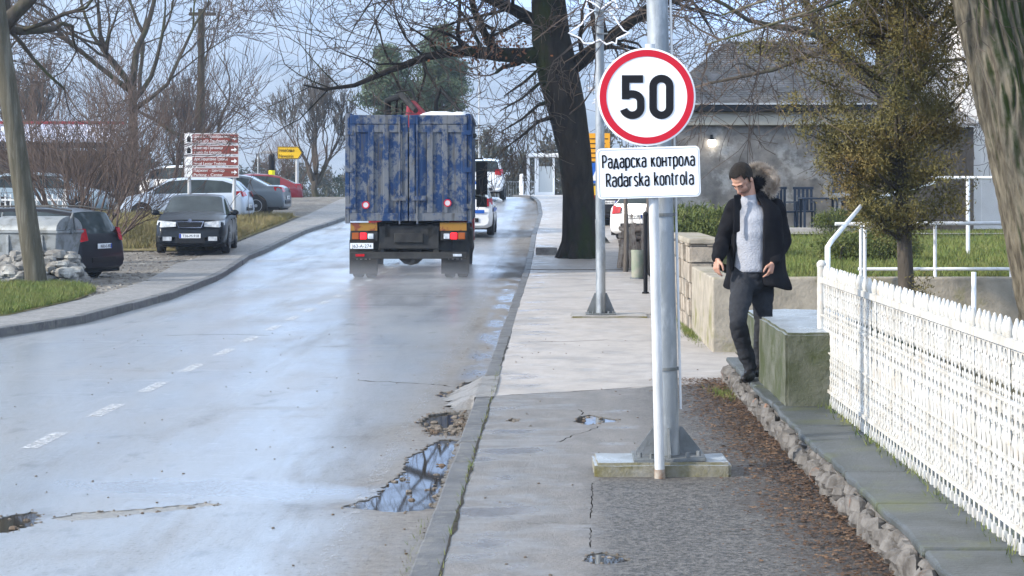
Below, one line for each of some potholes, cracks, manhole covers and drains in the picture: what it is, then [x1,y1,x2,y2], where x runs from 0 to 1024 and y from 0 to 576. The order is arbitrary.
pothole [582,552,631,565]
pothole [0,509,45,533]
pothole [414,410,468,440]
pothole [331,439,459,515]
pothole [574,415,621,429]
